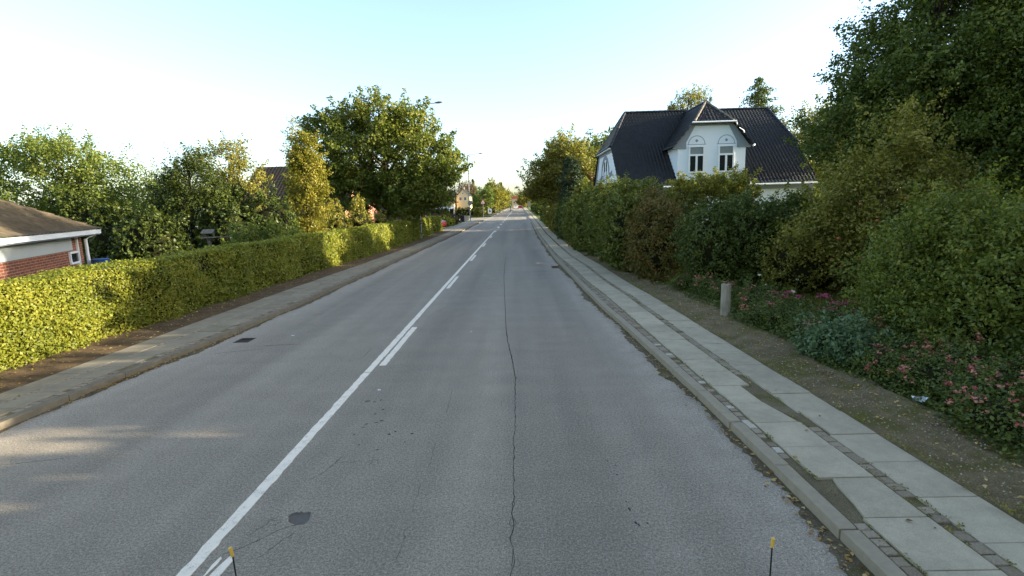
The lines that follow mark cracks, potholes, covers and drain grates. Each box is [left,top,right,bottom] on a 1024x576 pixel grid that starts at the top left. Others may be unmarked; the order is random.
crack [504,258,517,576]
crack [225,516,300,558]
